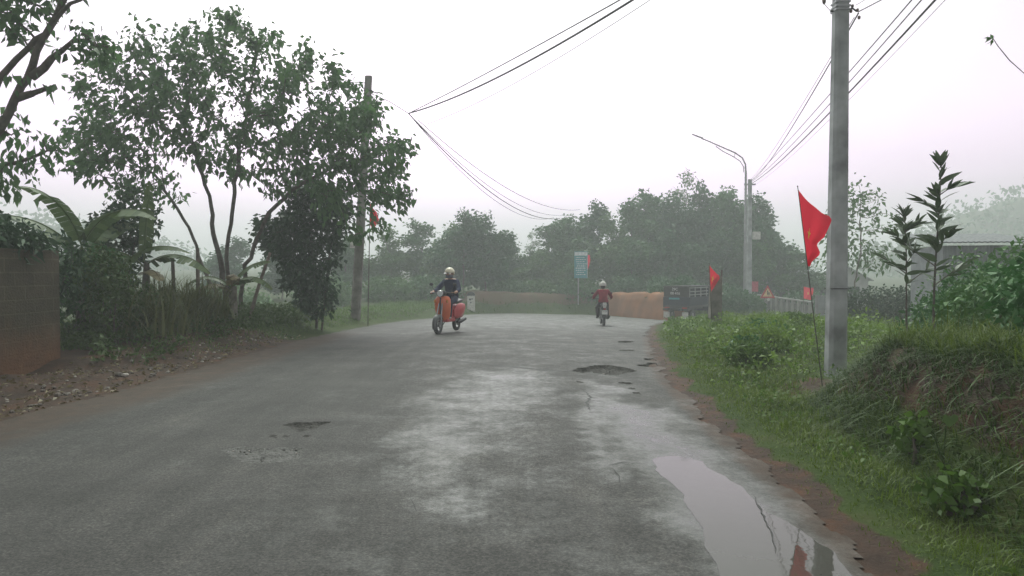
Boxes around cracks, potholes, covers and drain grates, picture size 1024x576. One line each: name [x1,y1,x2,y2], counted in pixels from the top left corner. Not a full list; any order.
pothole [222,446,304,463]
pothole [282,422,330,432]
pothole [572,365,636,375]
